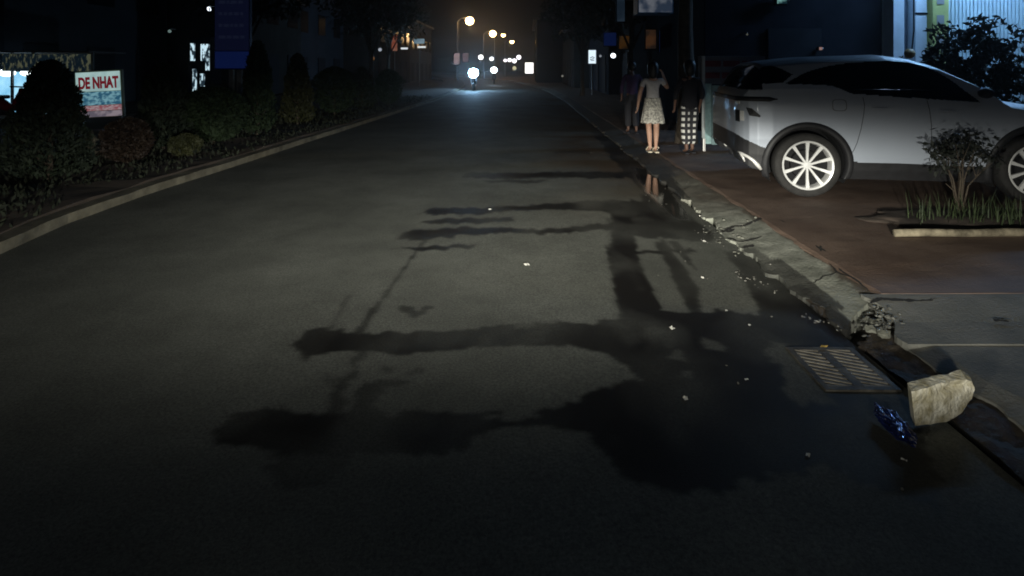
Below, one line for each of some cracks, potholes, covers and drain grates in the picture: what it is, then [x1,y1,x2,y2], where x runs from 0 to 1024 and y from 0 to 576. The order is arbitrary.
crack [815,263,933,303]
drain grate [785,347,902,392]
crack [710,218,763,248]
pothole [850,314,879,353]
